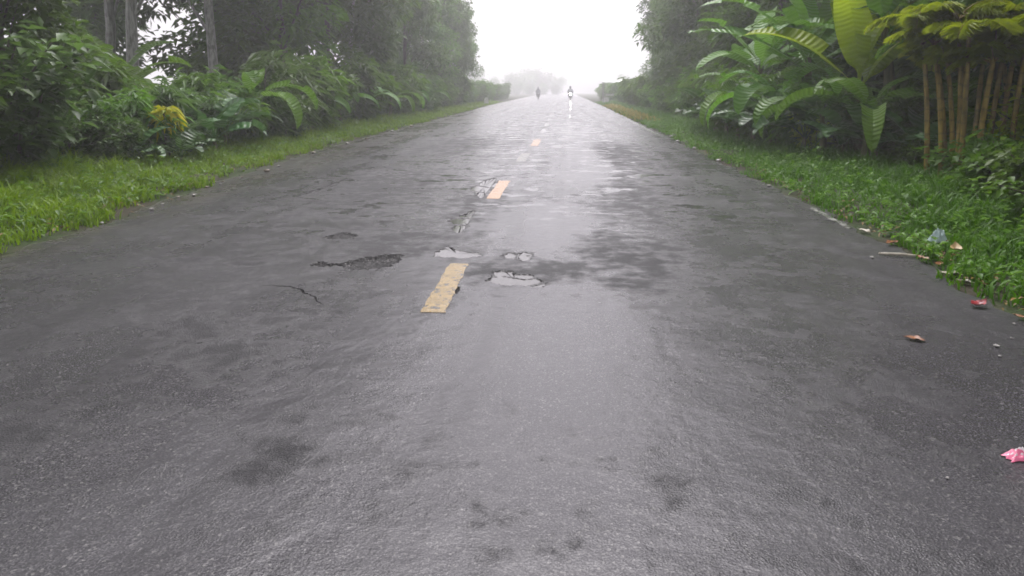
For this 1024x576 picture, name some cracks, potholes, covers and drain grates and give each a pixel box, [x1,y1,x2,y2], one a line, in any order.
crack [265,285,323,304]
pothole [447,210,476,234]
pothole [500,251,535,261]
pothole [485,269,549,287]
pothole [311,254,405,271]
pothole [323,232,359,240]
pothole [432,245,484,258]
pothole [469,178,497,198]
